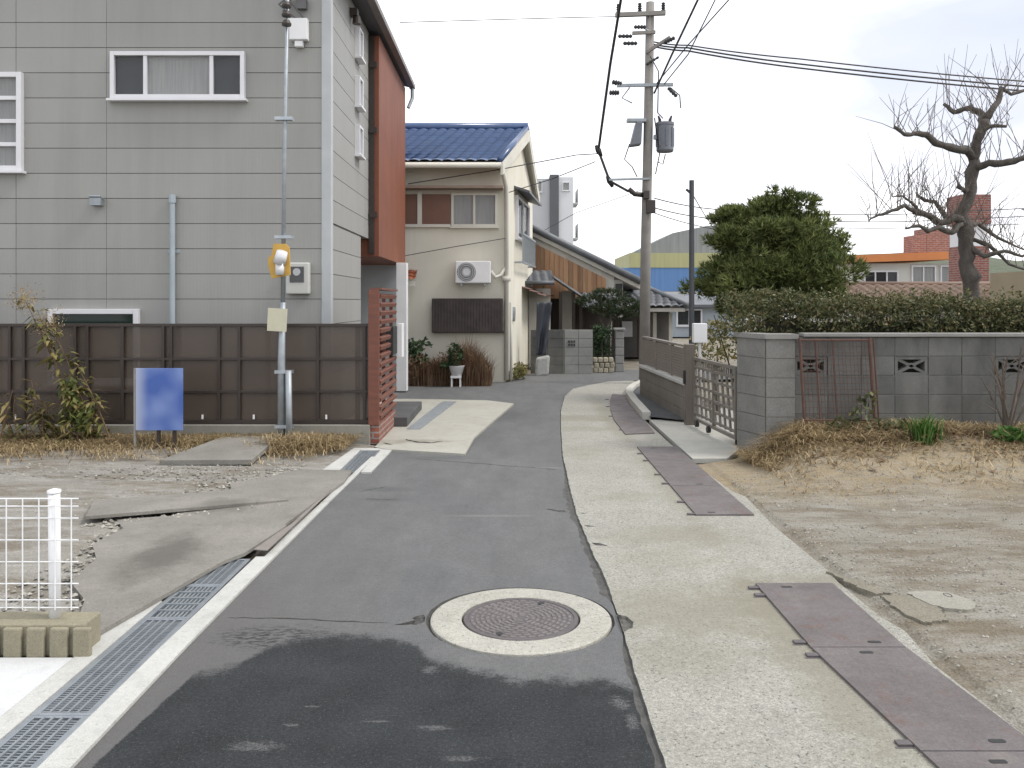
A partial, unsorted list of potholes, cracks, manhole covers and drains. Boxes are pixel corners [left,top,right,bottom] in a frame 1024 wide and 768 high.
manhole cover [430,588,612,657]
pothole [616,615,633,633]
drain grate [0,715,91,768]
drain grate [341,450,380,474]
drain grate [188,559,250,587]
drain grate [31,618,189,715]
drain grate [144,585,223,619]
